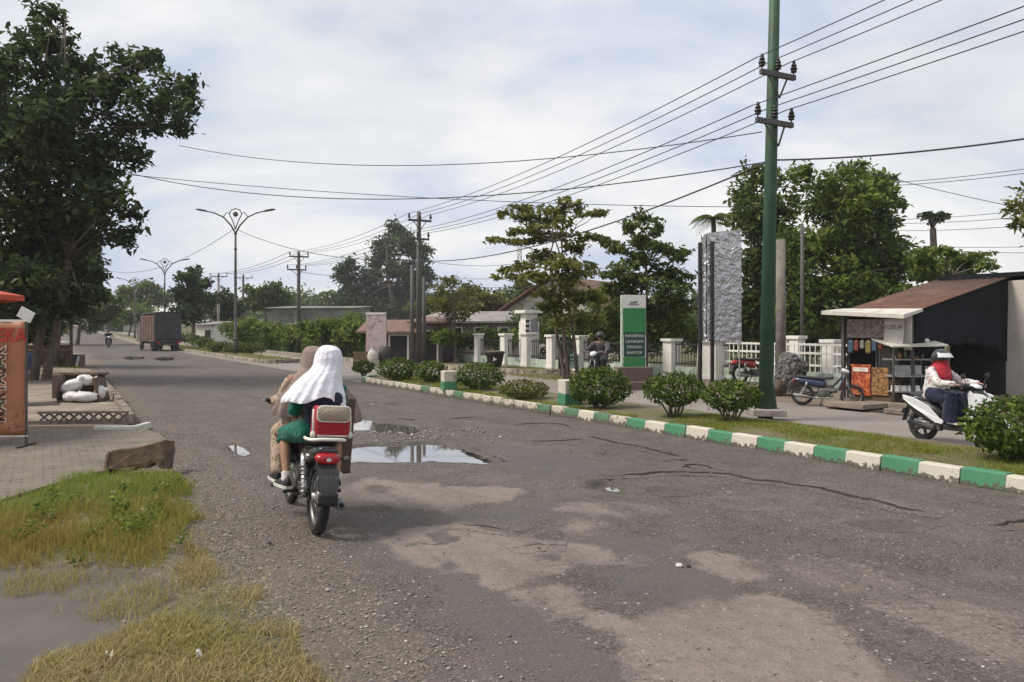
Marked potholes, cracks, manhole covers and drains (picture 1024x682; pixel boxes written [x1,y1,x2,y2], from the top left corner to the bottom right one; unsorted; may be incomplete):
pothole [353,418,381,431]
pothole [351,440,498,465]
pothole [220,443,259,457]
pothole [365,421,427,434]
crack [458,434,1024,531]
